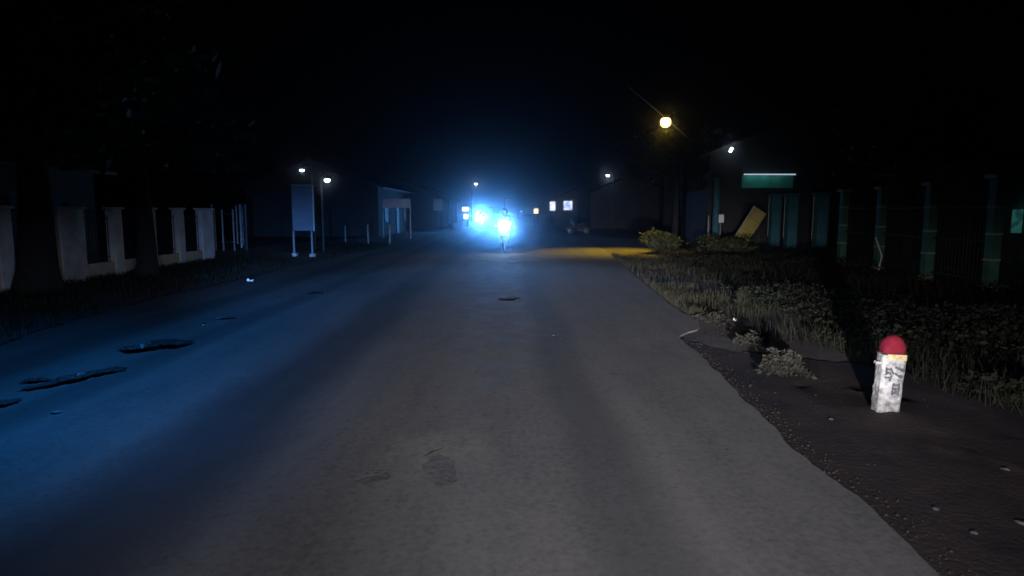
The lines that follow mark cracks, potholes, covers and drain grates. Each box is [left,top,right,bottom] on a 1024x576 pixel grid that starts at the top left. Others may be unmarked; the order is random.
pothole [422,454,458,488]
pothole [116,339,199,354]
pothole [16,366,131,393]
pothole [351,467,392,483]
pothole [0,398,22,409]
